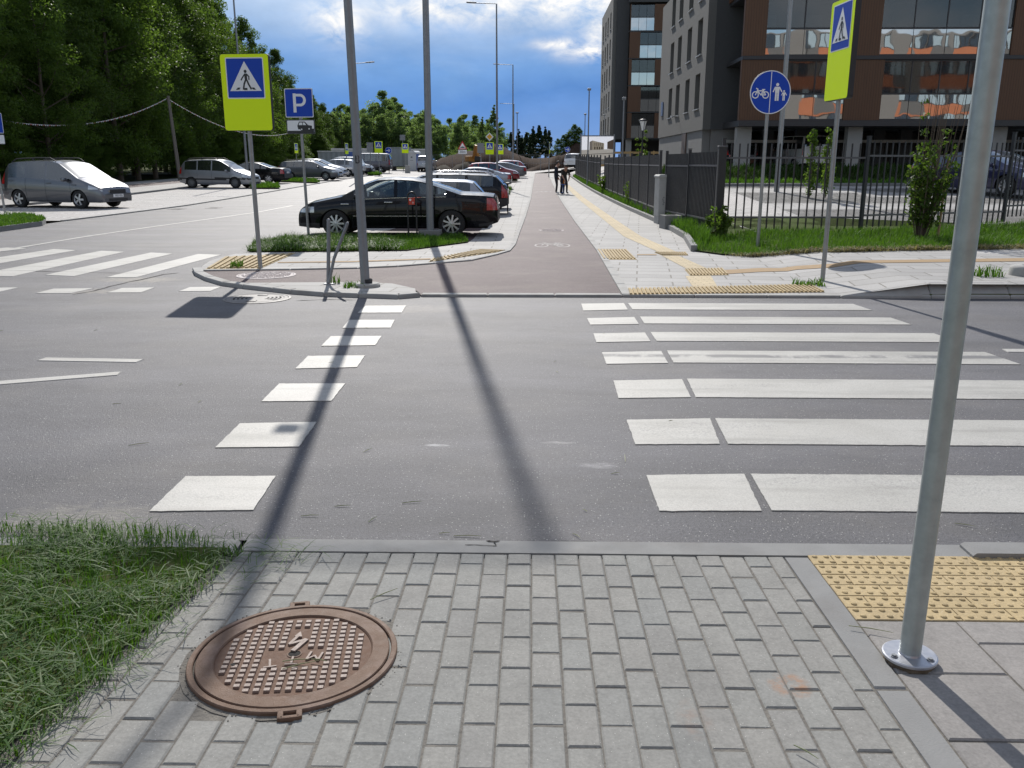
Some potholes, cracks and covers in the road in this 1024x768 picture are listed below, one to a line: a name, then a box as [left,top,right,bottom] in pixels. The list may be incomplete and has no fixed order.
manhole cover [186,601,397,723]
manhole cover [223,293,291,304]
manhole cover [236,271,296,279]
